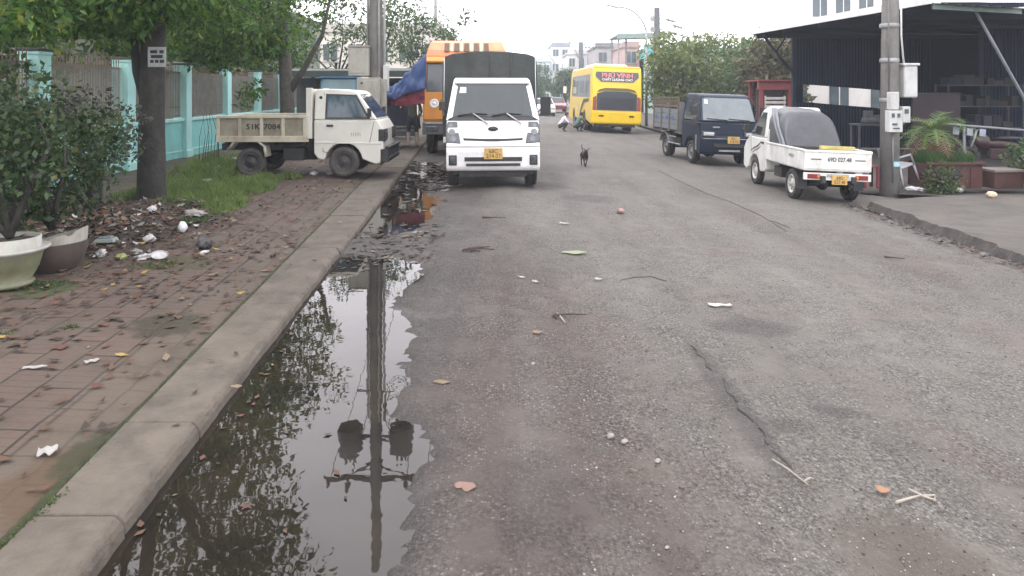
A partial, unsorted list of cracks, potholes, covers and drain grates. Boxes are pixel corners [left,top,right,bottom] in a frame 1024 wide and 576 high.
crack [690,345,792,467]
crack [658,170,790,232]
